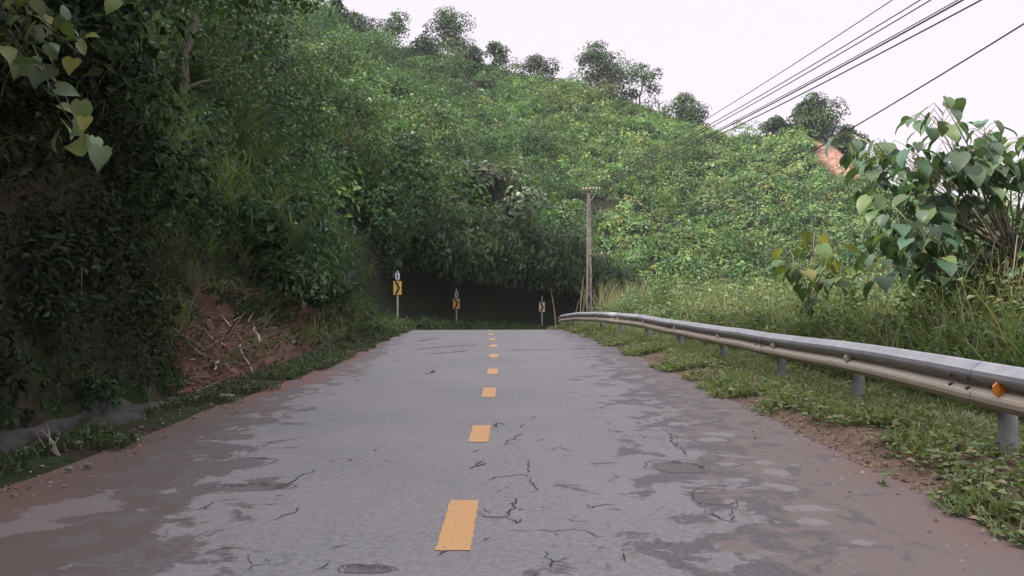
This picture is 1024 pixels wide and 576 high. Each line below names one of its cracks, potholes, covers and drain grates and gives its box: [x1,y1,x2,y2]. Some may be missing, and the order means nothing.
crack [470,415,632,549]
pothole [643,459,712,473]
pothole [338,564,399,573]
crack [420,338,470,374]
crack [686,485,738,522]
